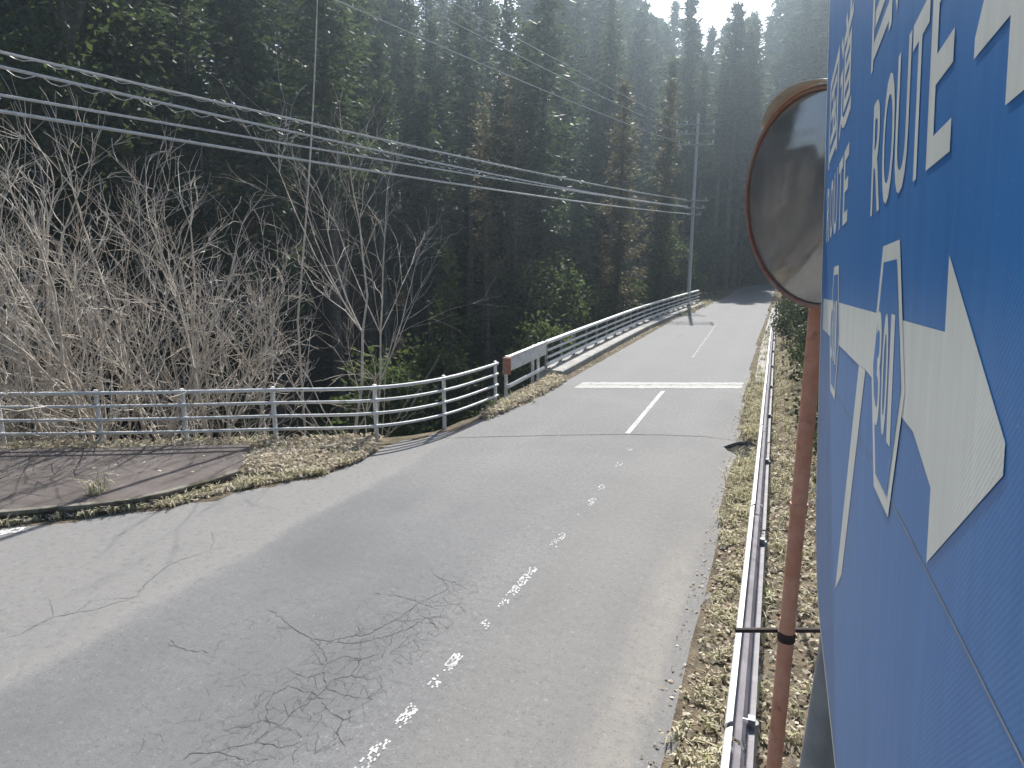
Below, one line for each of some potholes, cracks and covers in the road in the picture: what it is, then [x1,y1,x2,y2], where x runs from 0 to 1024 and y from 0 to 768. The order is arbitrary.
crack [133,550,493,768]
crack [6,531,224,638]
pothole [723,441,757,458]
